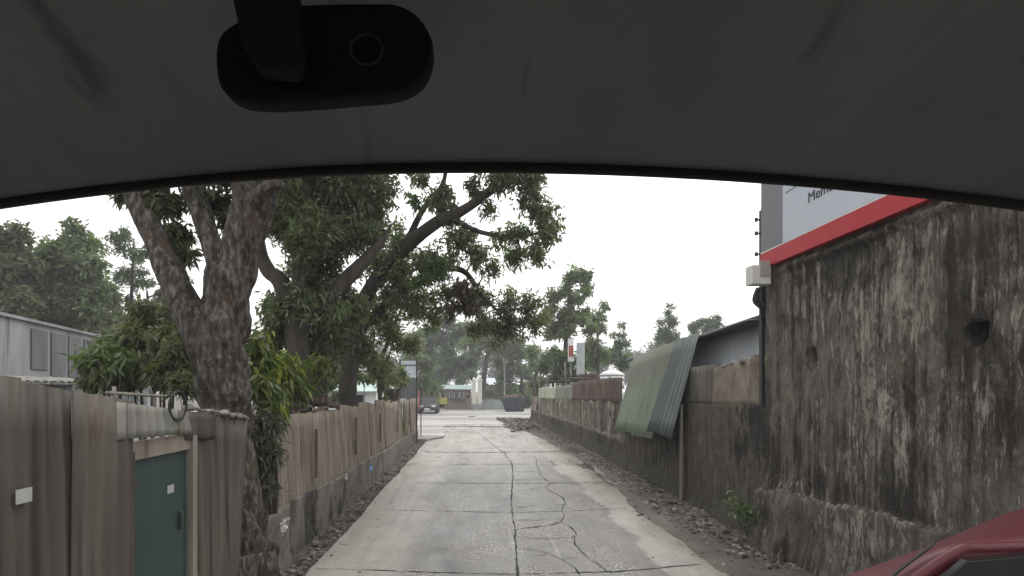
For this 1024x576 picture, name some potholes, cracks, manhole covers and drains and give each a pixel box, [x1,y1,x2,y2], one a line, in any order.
crack [471,429,607,576]
